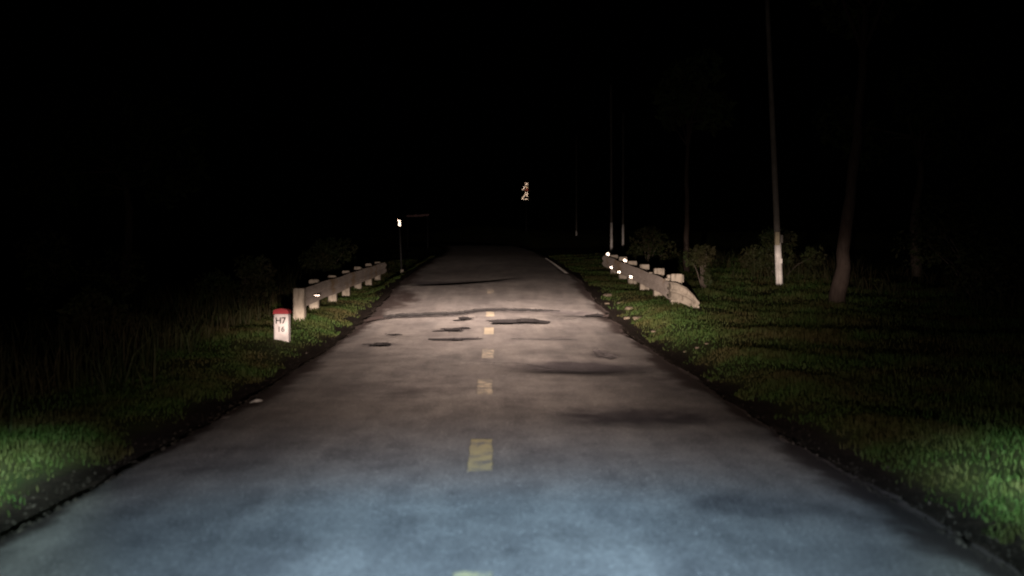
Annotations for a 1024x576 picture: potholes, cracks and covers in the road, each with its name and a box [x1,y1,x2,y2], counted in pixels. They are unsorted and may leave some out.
pothole [593,348,617,360]
crack [382,308,560,318]
pothole [485,317,551,325]
